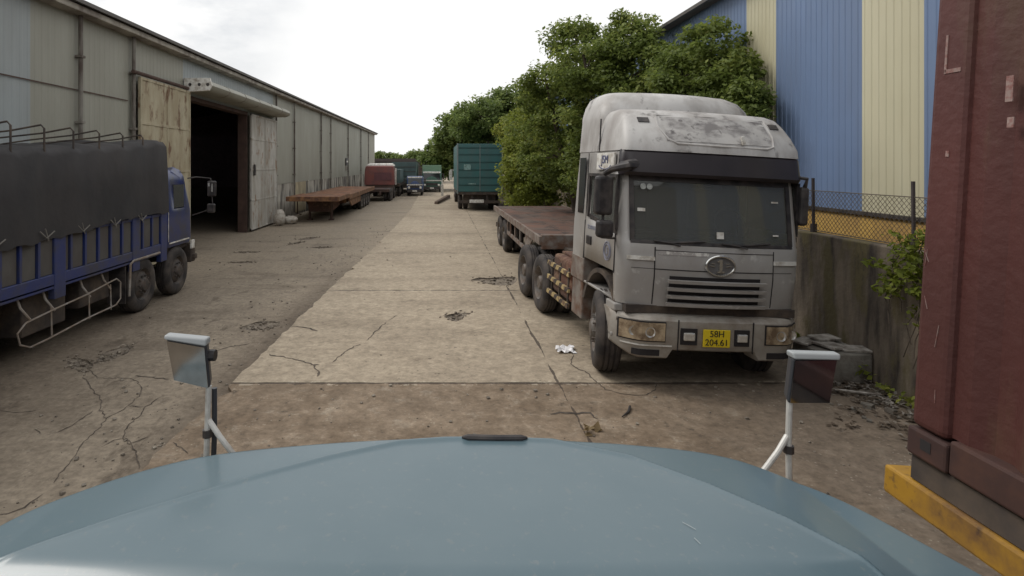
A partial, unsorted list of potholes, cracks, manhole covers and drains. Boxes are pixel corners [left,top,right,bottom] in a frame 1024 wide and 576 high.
pothole [63,354,97,376]
pothole [439,310,473,322]
pothole [238,318,287,332]
crack [570,355,657,395]
crack [4,369,166,514]
crack [552,411,597,419]
crack [269,315,397,376]
pothole [471,275,517,287]
